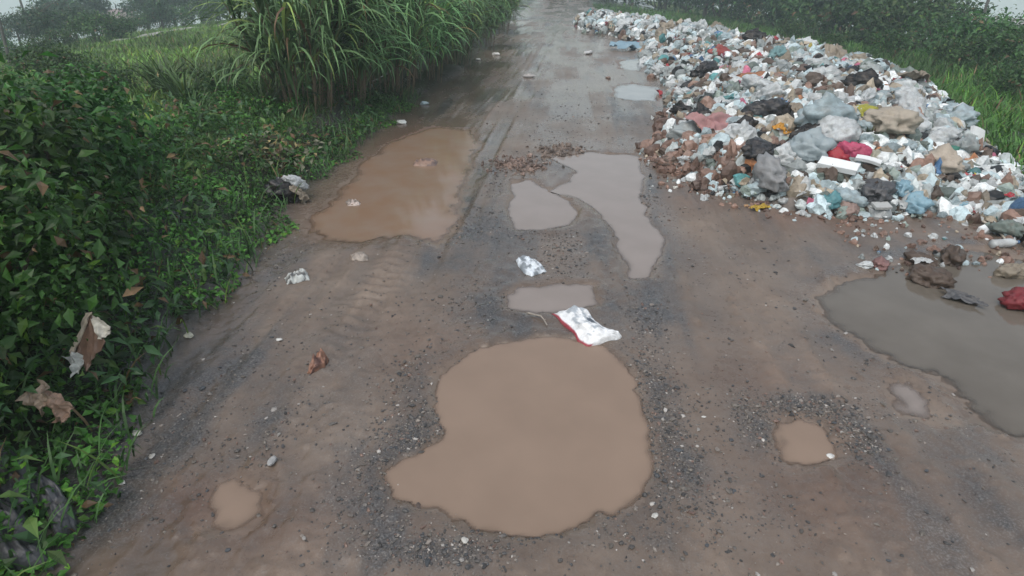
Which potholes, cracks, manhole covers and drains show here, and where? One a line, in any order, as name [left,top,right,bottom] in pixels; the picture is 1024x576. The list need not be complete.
pothole [764,407,855,475]
pothole [548,150,668,281]
pothole [190,463,280,543]
pothole [373,331,663,543]
pothole [503,177,582,231]
pothole [499,279,605,316]
